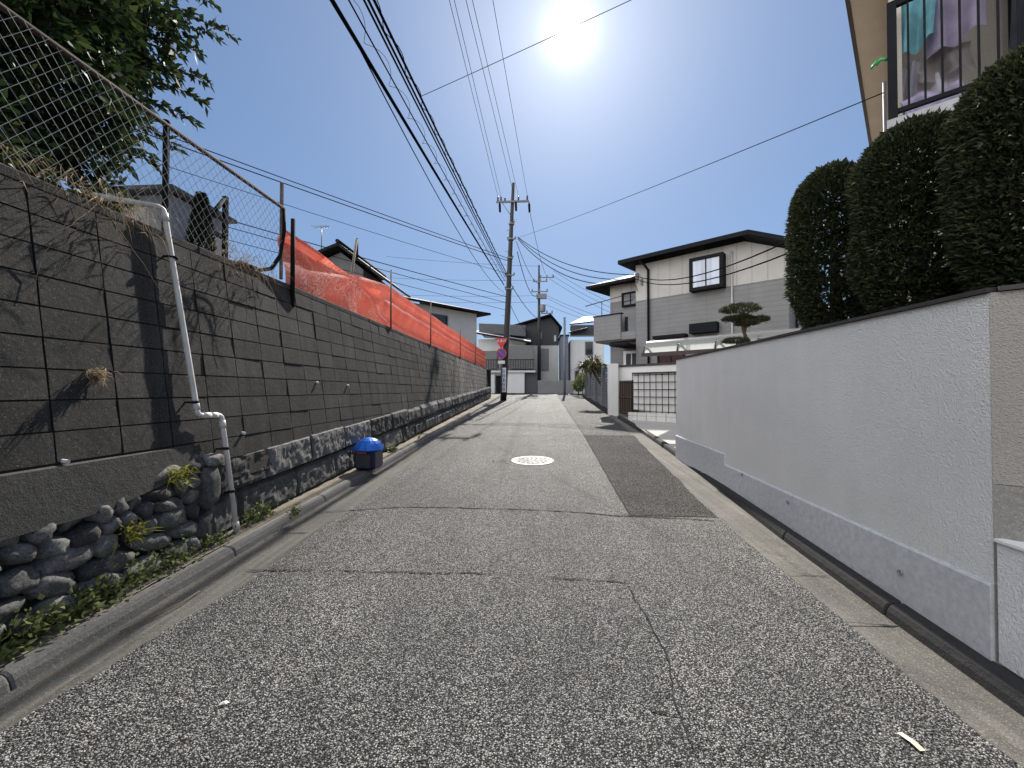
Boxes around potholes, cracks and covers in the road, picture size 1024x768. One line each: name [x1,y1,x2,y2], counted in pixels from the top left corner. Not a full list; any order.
crack [547,577,696,753]
manhole cover [512,456,554,465]
